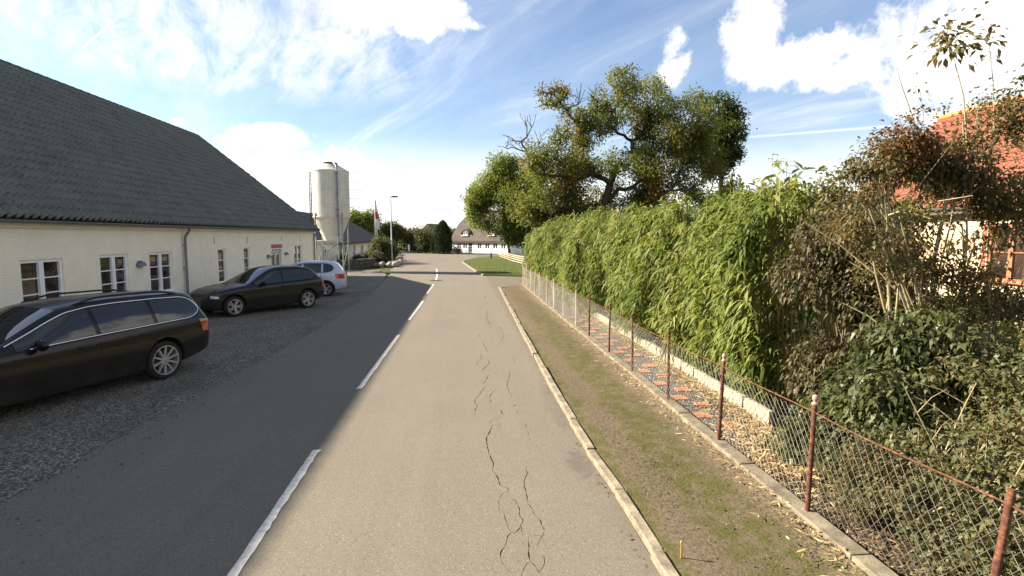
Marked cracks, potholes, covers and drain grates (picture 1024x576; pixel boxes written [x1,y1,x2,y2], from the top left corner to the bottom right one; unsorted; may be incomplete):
crack [474,320,545,576]
